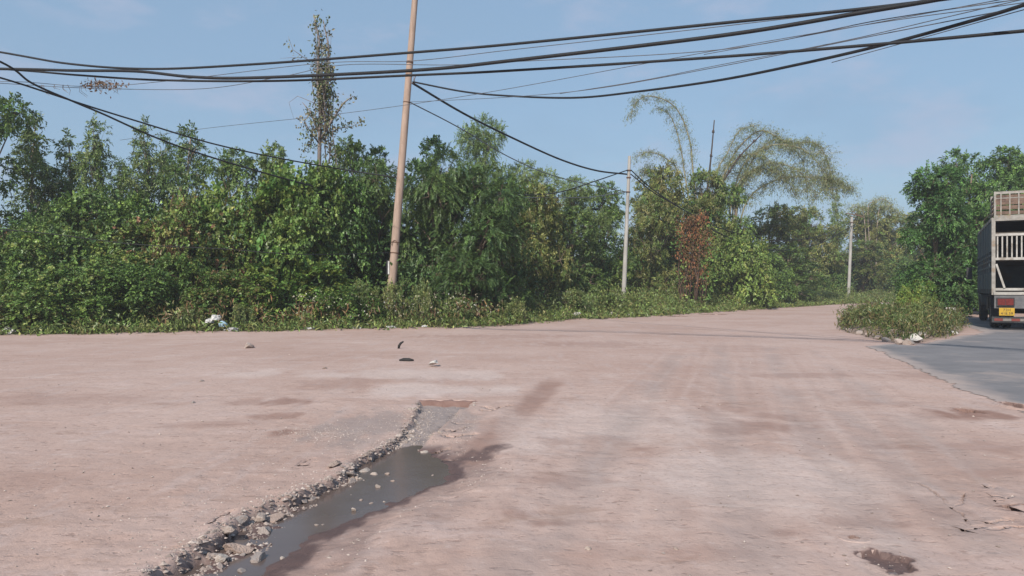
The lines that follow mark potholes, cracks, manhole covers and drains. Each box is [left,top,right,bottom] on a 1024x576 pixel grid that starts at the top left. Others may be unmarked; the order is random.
crack [904,482,1024,535]
pothole [847,543,933,576]
